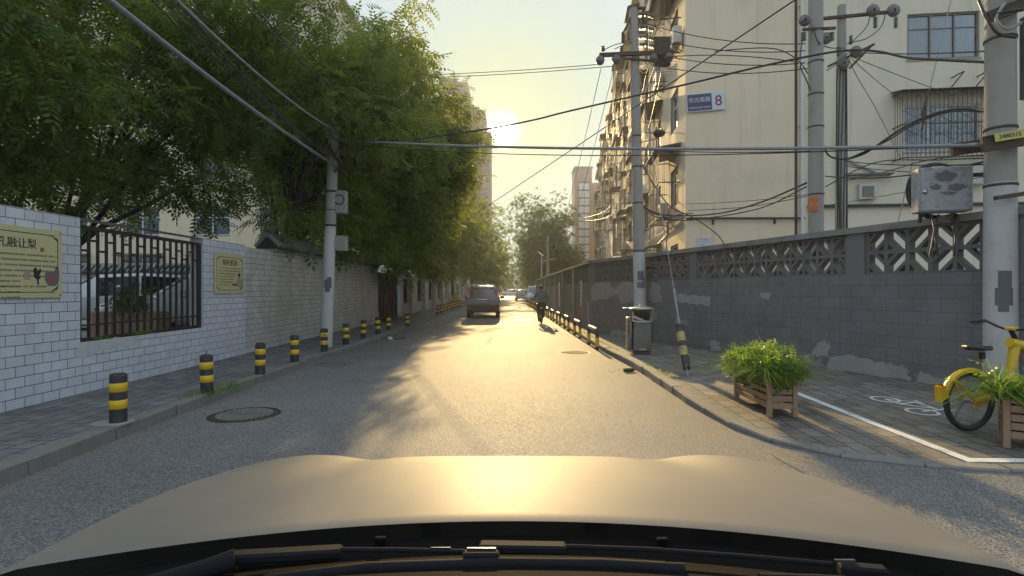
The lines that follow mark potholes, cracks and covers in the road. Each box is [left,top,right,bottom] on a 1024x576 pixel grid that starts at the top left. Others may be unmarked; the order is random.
manhole cover [206,407,282,423]
